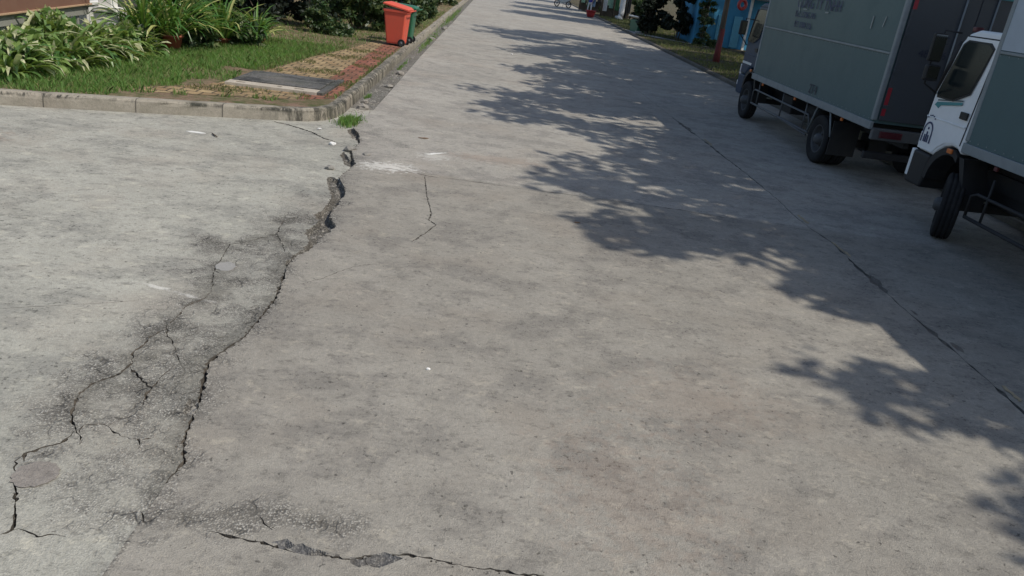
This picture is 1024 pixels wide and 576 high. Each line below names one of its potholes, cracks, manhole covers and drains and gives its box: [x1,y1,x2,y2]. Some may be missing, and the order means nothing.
crack [413,177,436,241]
crack [2,121,362,537]
crack [210,517,545,576]
